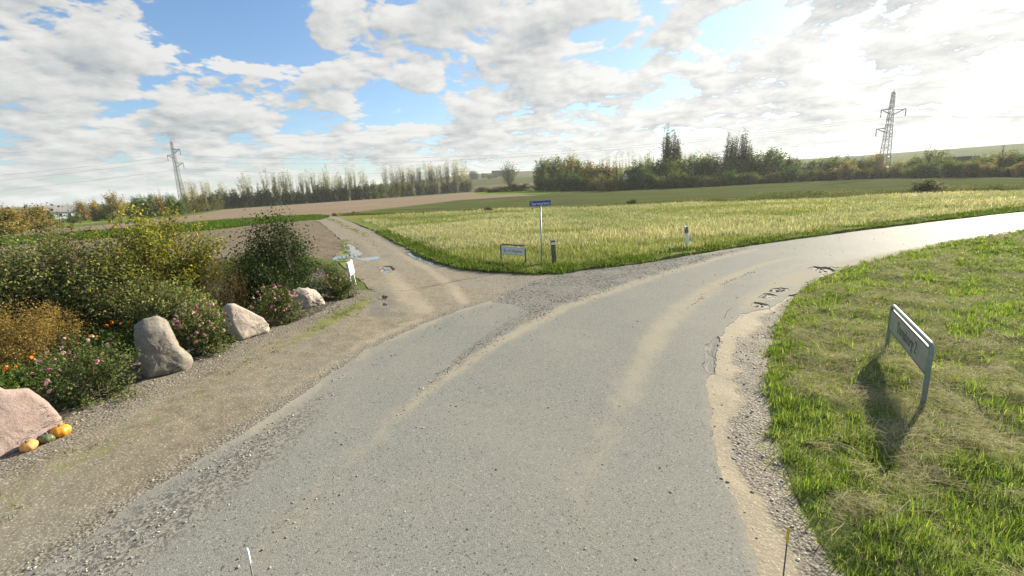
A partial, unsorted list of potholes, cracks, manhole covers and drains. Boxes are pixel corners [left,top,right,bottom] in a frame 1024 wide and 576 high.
pothole [806,266,835,274]
